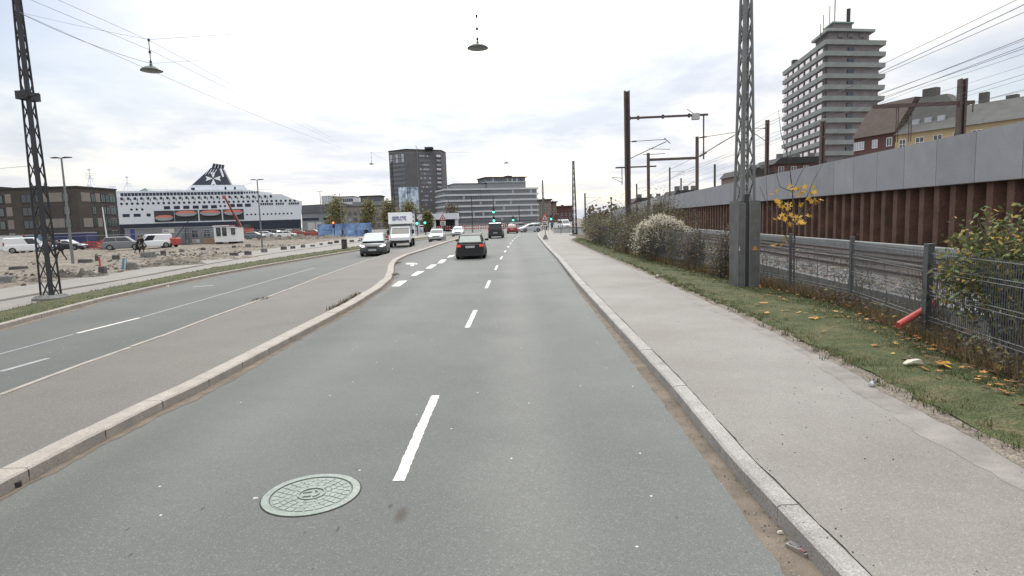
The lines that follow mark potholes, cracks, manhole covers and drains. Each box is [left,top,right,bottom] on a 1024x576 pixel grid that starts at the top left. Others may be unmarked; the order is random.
manhole cover [259,474,362,518]
